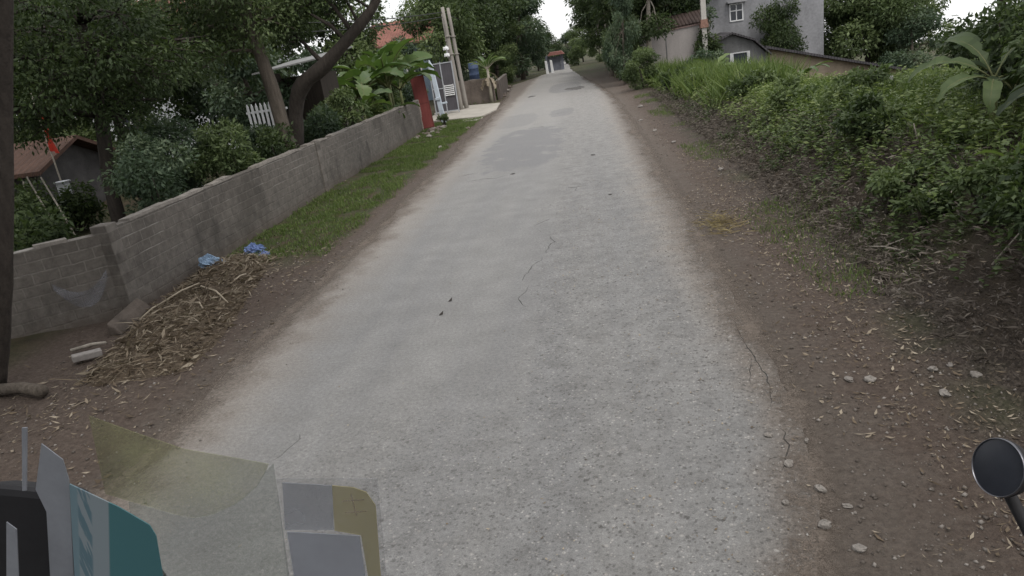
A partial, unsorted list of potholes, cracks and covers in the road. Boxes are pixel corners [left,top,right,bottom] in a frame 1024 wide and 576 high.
crack [731,318,772,406]
crack [768,431,790,468]
